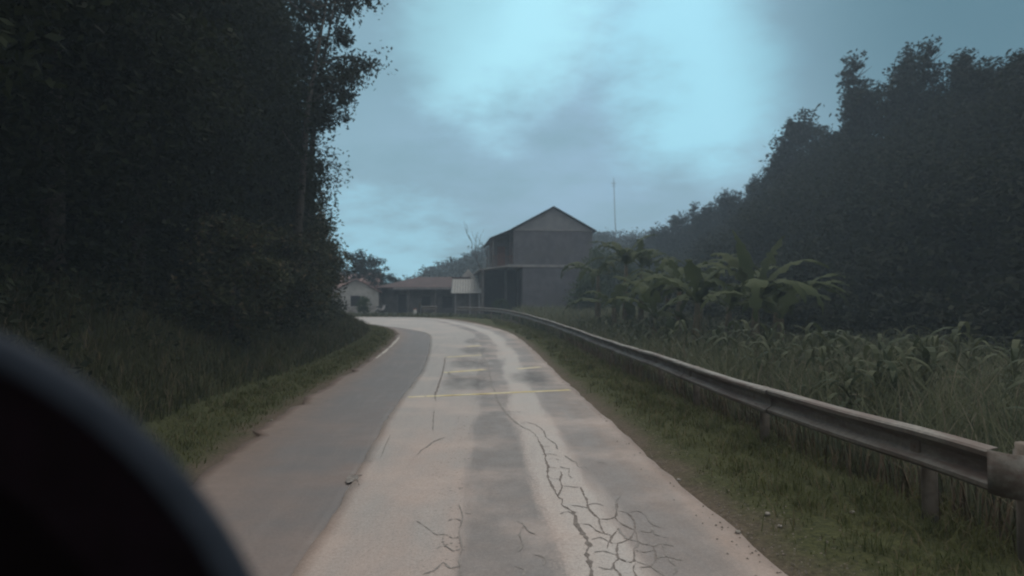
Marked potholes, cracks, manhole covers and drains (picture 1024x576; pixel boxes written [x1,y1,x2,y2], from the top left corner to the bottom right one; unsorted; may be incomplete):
crack [478,348,681,576]
crack [417,505,471,576]
